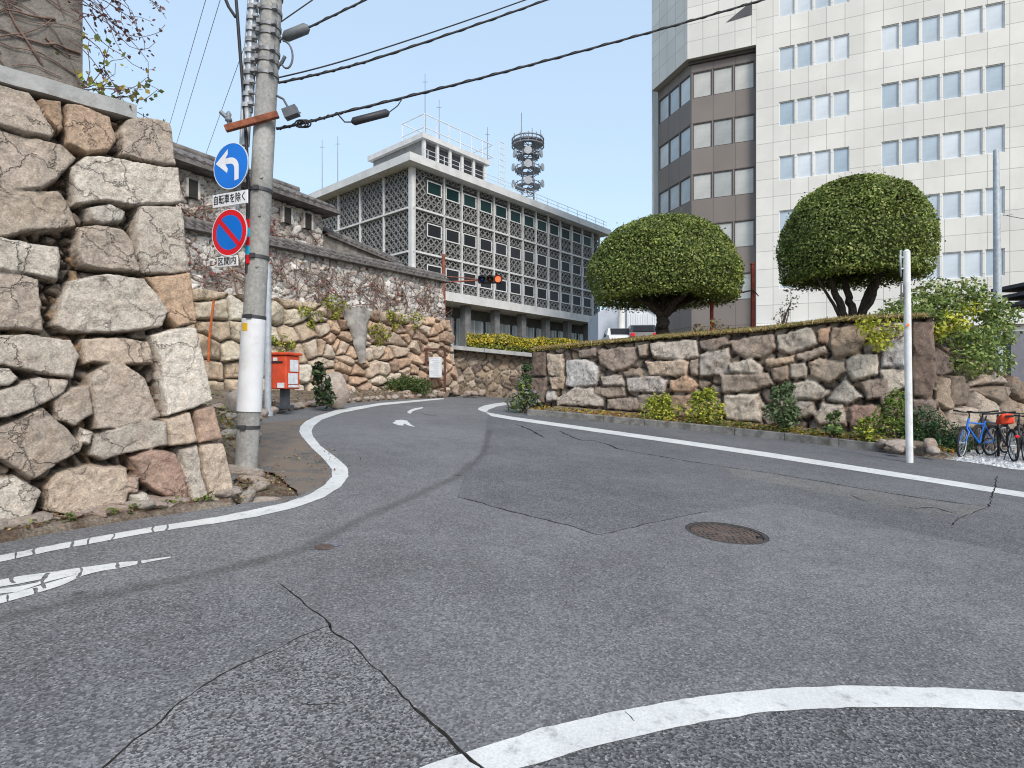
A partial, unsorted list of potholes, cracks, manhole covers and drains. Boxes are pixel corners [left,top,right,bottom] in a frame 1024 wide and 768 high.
crack [560,431,998,526]
manhole cover [685,522,769,545]
